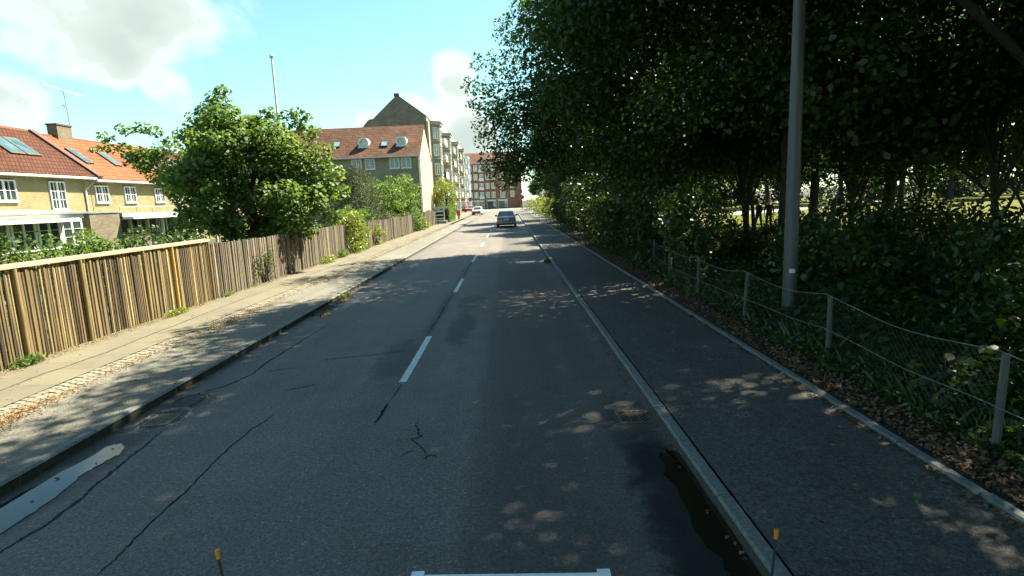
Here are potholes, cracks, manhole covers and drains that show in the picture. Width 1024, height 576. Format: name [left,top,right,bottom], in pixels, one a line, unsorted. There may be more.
crack [186,324,330,412]
crack [401,415,437,460]
crack [0,418,268,576]
drain grate [614,410,654,424]
